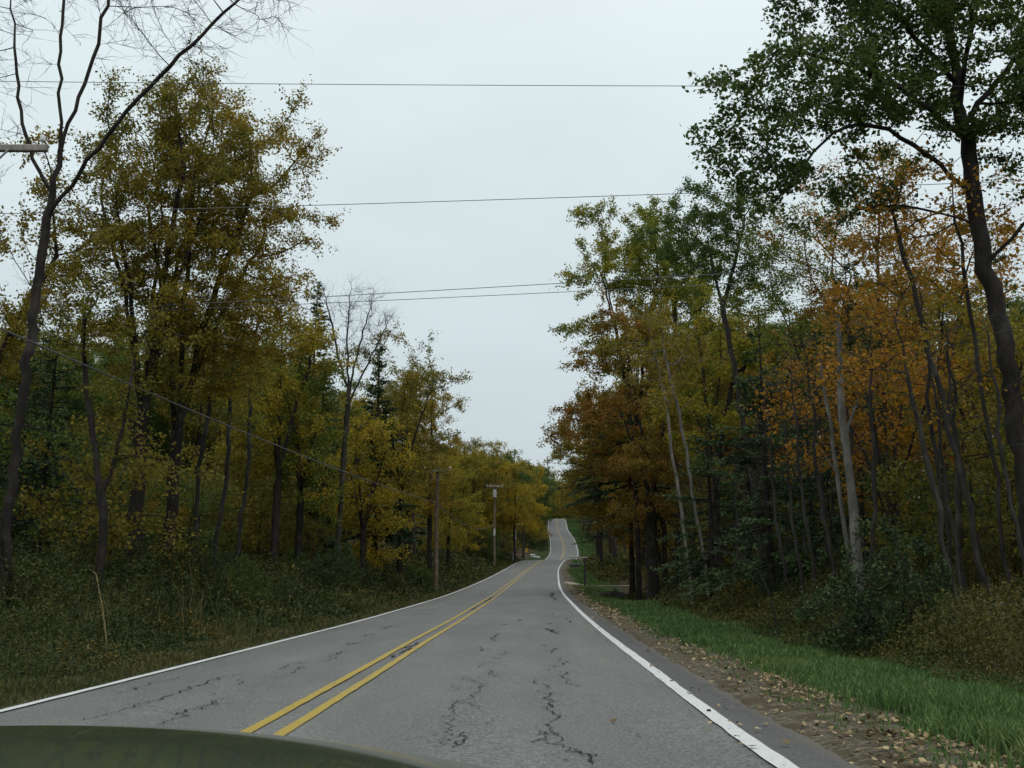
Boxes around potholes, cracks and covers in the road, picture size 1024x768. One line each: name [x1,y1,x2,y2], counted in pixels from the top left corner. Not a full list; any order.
crack [532,623,608,765]
crack [82,673,246,726]
crack [283,626,392,673]
crack [435,620,521,747]
